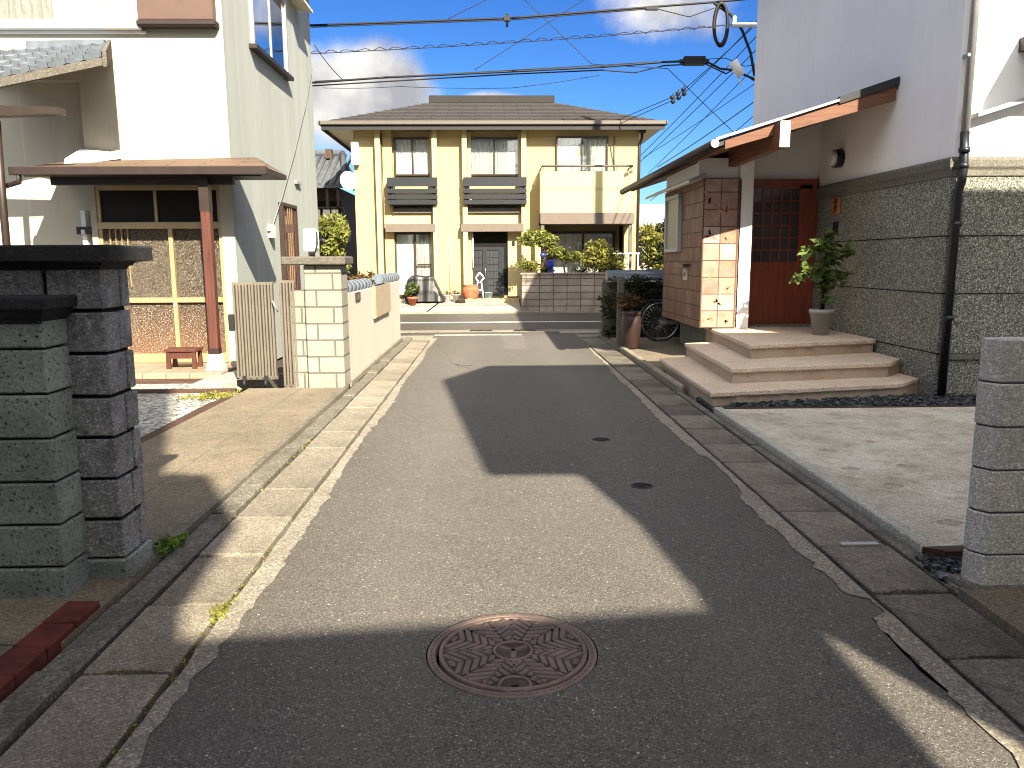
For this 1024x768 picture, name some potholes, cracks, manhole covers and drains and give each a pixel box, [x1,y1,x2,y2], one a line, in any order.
manhole cover [427,613,597,699]
